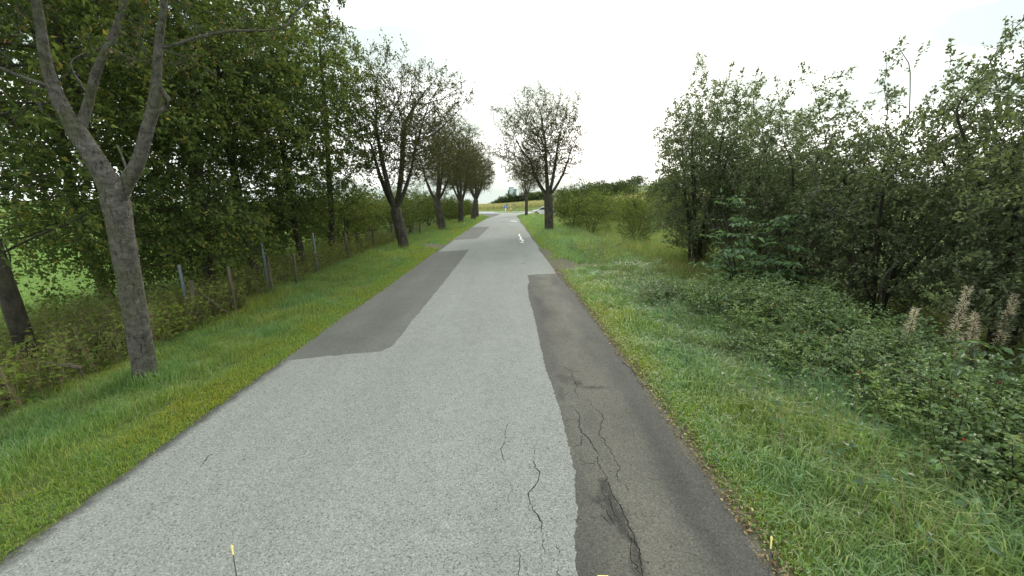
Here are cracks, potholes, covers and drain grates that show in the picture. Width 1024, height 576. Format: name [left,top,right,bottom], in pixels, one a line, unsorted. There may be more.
crack [565,370,643,576]
crack [508,452,560,575]
